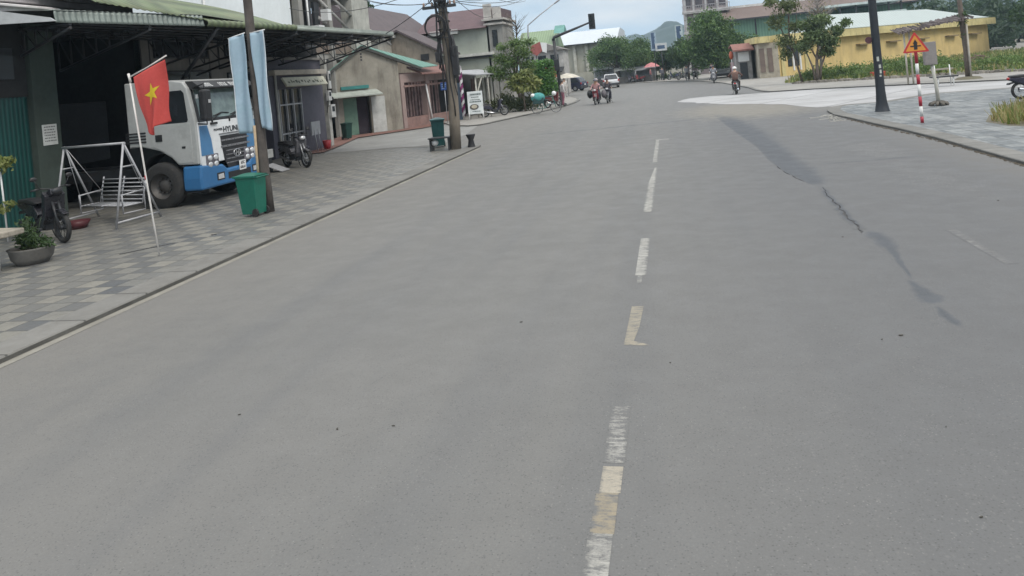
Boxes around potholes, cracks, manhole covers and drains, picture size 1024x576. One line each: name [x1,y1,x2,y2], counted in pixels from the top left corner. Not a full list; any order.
crack [512,111,969,328]
